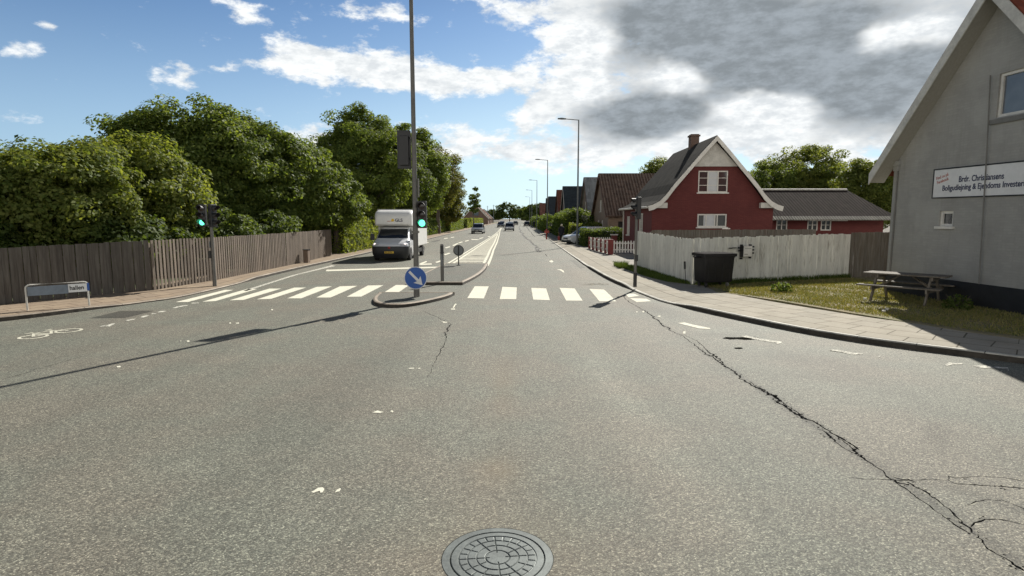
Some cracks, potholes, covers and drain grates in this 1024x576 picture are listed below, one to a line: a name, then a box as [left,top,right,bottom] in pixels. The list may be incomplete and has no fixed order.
manhole cover [441,528,553,576]
crack [623,296,1024,571]
crack [428,313,451,371]
